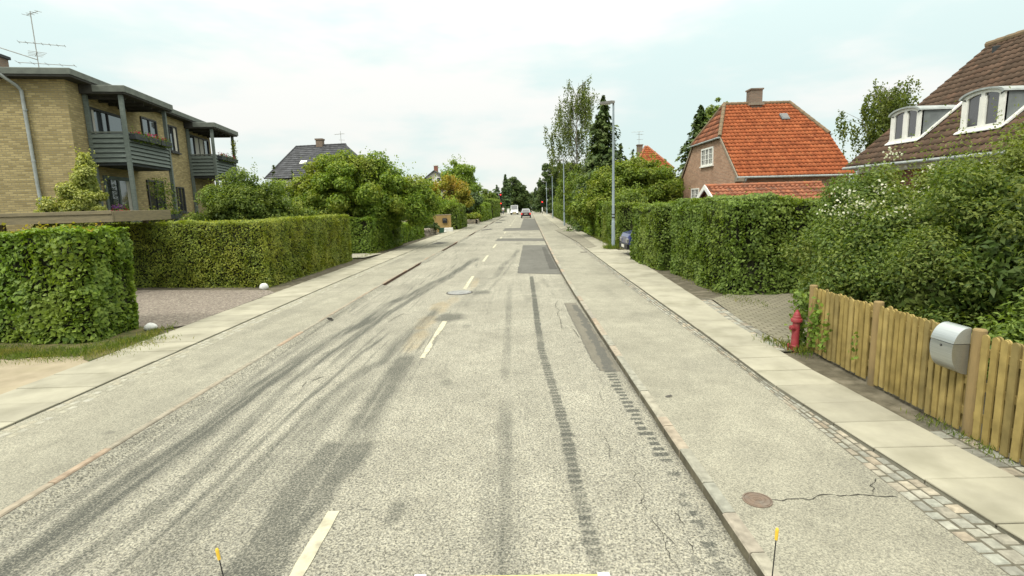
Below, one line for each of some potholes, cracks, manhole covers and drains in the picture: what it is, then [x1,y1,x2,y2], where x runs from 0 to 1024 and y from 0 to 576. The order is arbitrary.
manhole cover [742,492,773,508]
crack [630,451,694,569]
crack [772,478,897,501]
